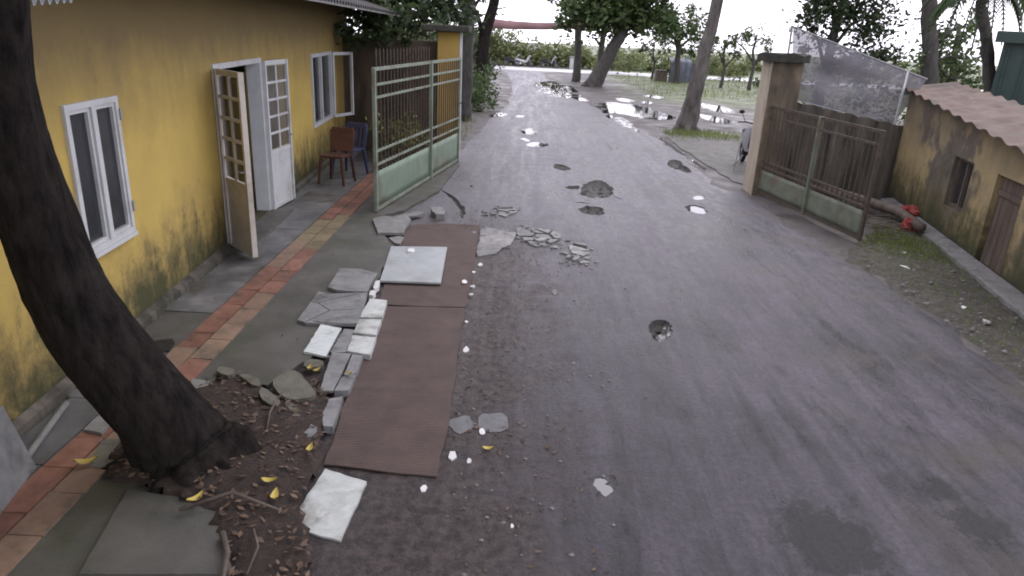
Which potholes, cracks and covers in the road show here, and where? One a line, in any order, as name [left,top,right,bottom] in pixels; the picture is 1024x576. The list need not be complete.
pothole [648,320,673,341]
pothole [667,160,692,173]
pothole [592,474,619,497]
crack [443,191,466,218]
pothole [579,180,614,198]
pothole [578,205,605,215]
